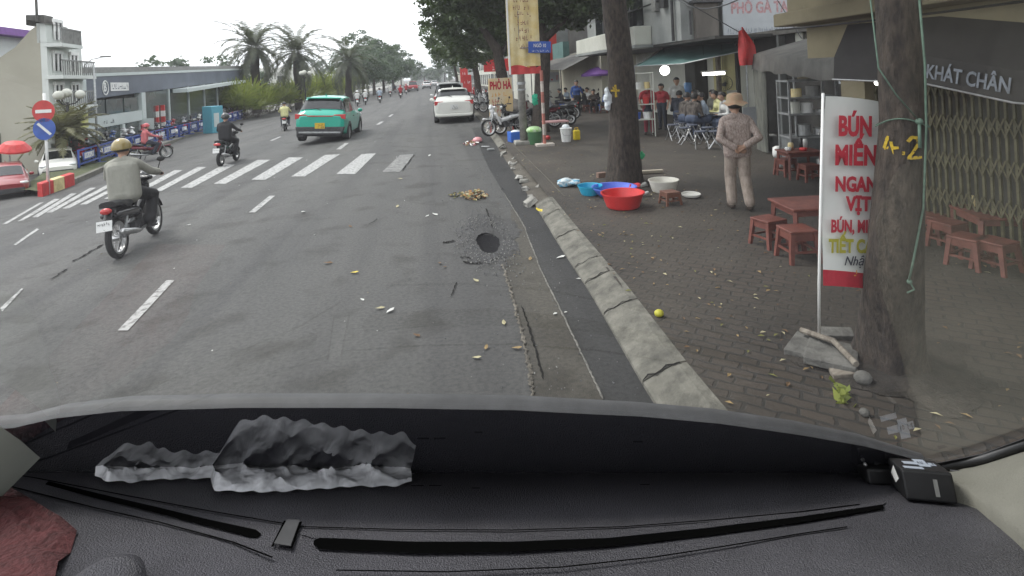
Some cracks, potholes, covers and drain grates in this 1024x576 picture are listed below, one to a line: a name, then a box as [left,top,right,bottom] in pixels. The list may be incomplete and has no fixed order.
pothole [476,234,500,253]
crack [521,306,543,378]
crack [51,244,103,279]
